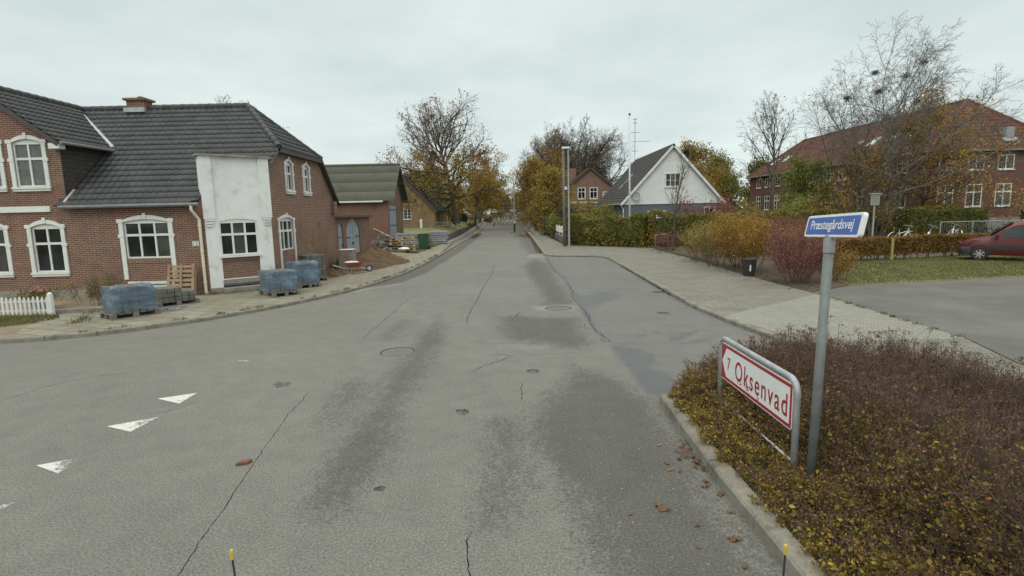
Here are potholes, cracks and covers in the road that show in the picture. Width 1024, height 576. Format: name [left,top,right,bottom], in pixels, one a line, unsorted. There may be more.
crack [547,258,620,344]
manhole cover [380,347,416,356]
crack [178,392,309,576]
